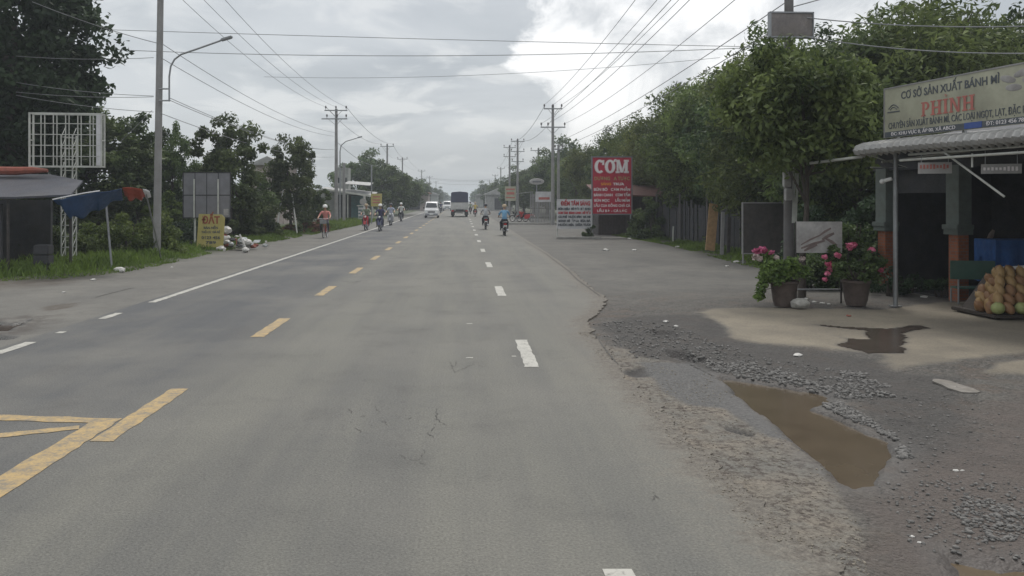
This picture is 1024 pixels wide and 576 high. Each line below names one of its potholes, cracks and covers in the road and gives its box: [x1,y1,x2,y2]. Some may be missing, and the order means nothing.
pothole [643,328,686,340]
pothole [657,349,716,364]
pothole [621,366,659,378]
pothole [710,372,908,491]
